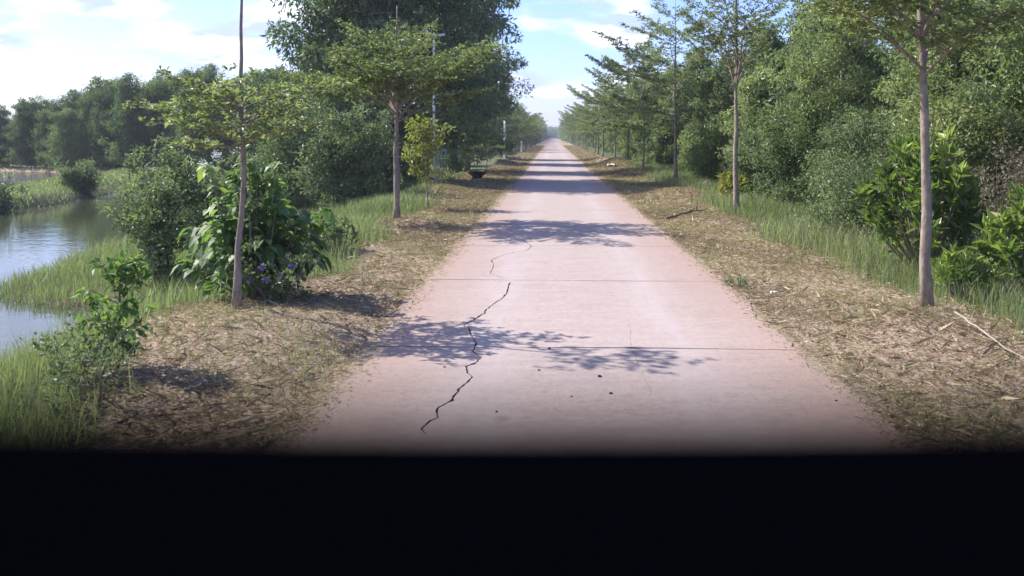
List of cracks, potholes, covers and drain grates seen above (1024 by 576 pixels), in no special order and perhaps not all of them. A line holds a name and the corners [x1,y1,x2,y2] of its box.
crack [451,238,532,400]
